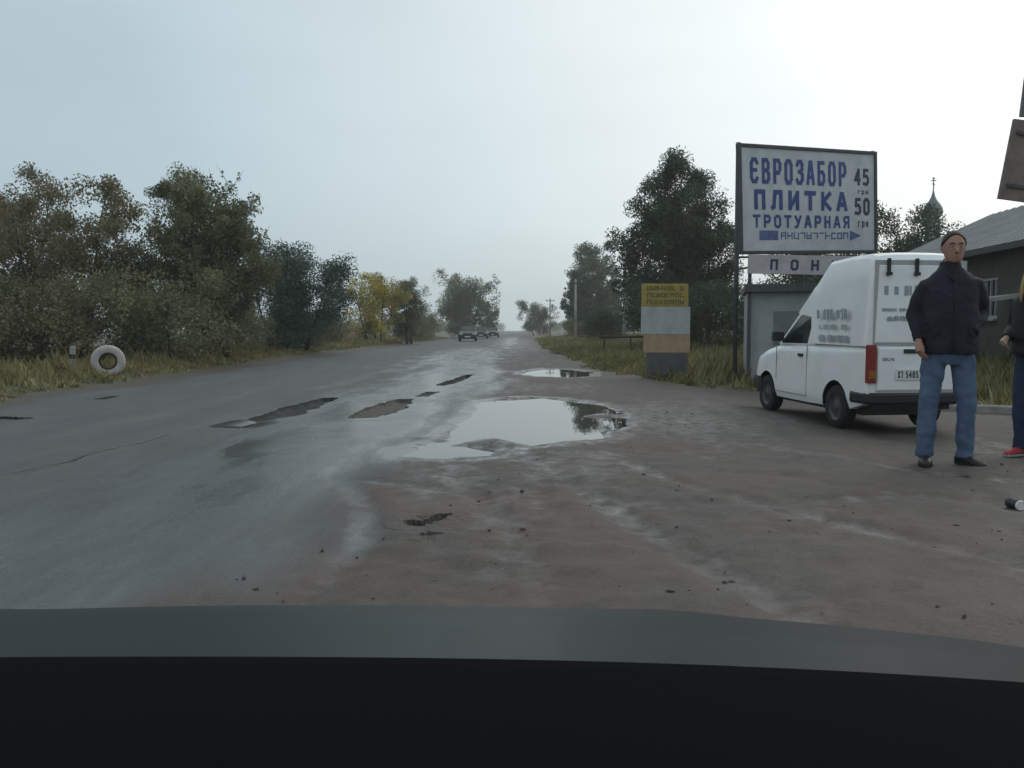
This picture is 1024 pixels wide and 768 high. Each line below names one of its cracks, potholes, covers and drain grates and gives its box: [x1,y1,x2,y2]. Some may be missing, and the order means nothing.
pothole [339,399,421,420]
pothole [238,397,346,424]
pothole [431,374,477,386]
crack [0,433,176,477]
